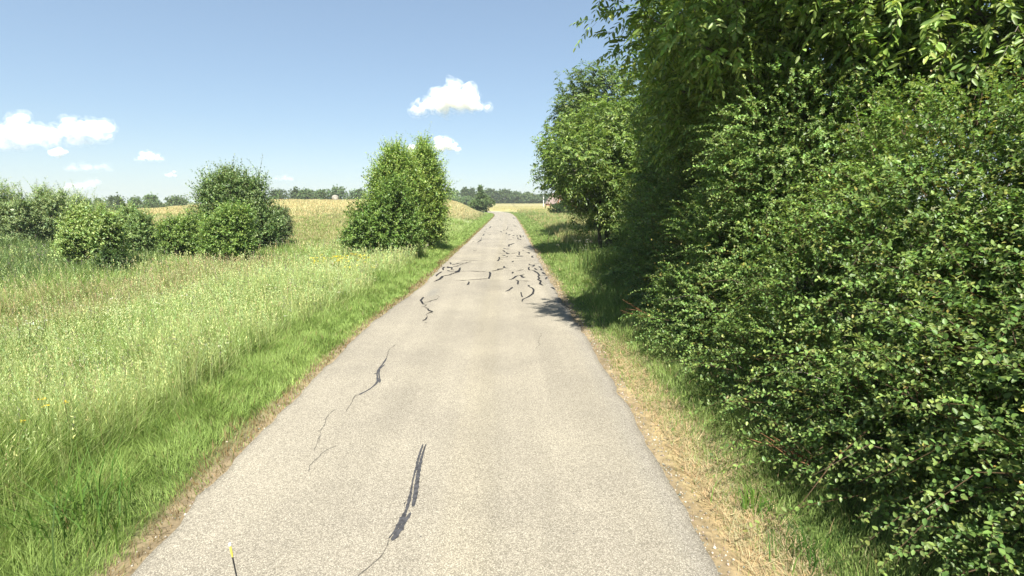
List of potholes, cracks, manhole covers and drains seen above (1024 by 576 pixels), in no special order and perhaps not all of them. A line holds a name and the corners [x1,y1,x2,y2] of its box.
crack [308,410,335,471]
crack [436,218,530,281]
